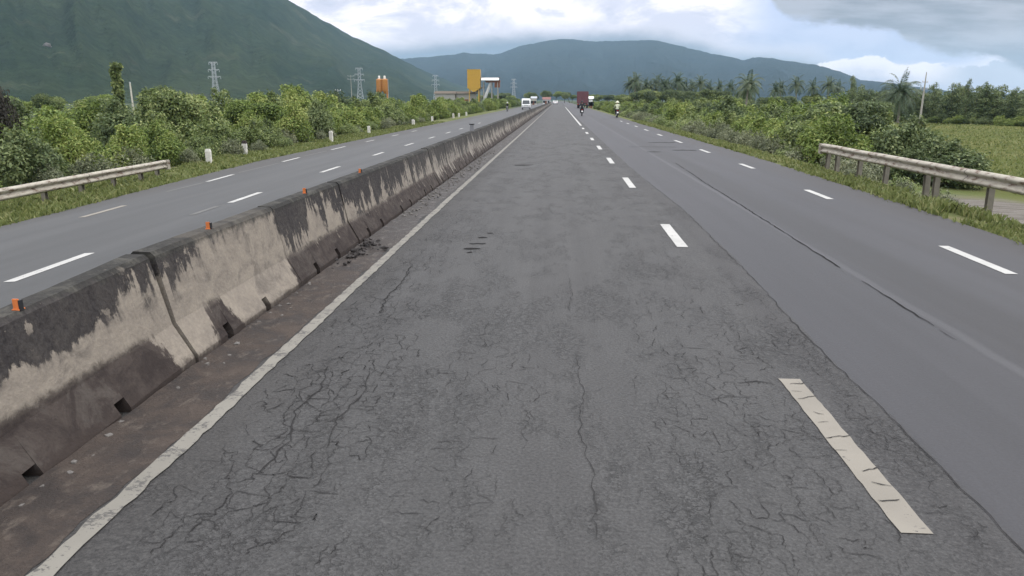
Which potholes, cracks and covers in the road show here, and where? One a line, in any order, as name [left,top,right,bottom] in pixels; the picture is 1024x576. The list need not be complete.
crack [388,324,551,547]
crack [567,355,631,537]
crack [289,529,371,563]
crack [629,250,934,576]
